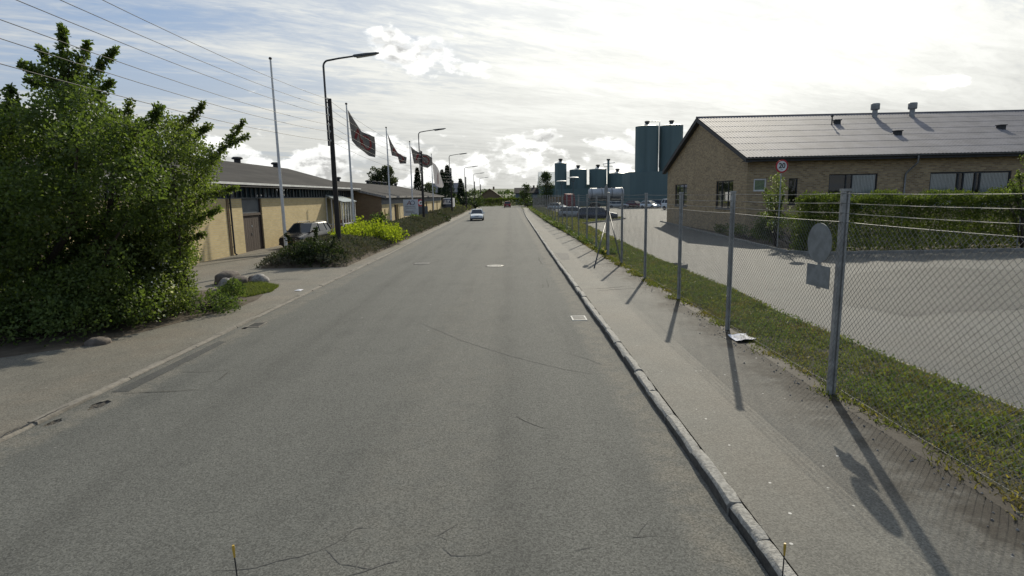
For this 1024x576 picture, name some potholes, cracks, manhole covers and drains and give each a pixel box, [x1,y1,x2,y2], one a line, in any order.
crack [430,524,490,556]
crack [214,527,399,576]
